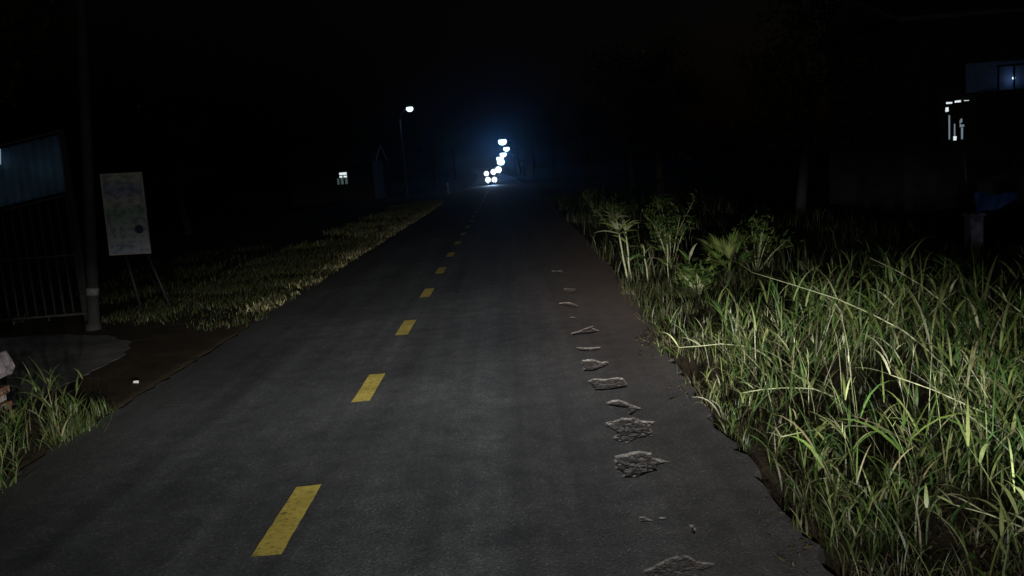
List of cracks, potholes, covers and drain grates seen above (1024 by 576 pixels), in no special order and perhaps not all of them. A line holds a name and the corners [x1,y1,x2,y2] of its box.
pothole [570,326,600,335]
pothole [581,359,609,371]
pothole [642,555,715,576]
pothole [588,377,628,390]
pothole [606,399,642,415]
pothole [605,417,655,443]
pothole [613,451,669,478]
